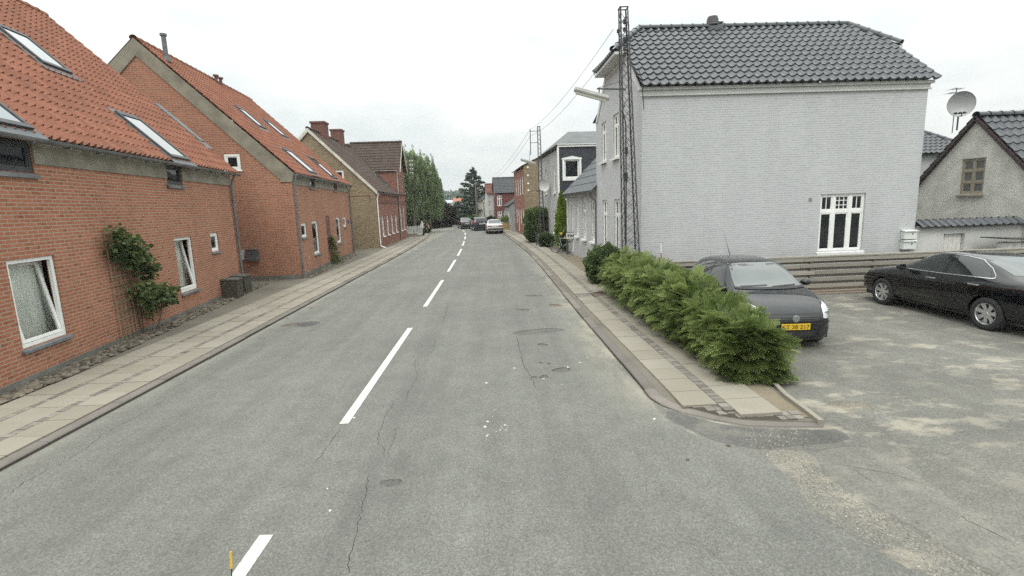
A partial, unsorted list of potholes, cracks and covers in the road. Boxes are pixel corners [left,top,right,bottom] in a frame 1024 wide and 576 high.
crack [347,341,436,571]
crack [1,399,165,502]
